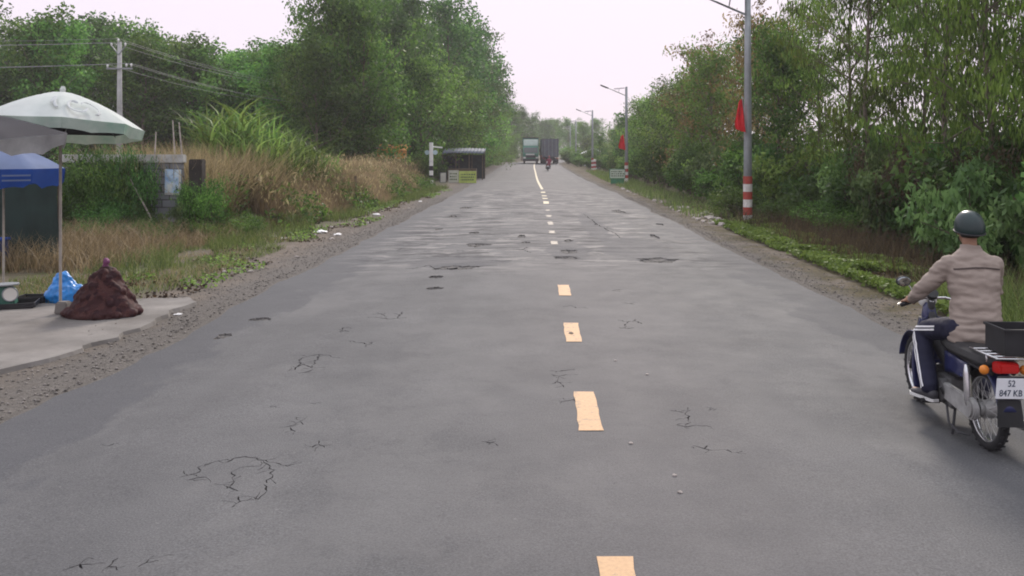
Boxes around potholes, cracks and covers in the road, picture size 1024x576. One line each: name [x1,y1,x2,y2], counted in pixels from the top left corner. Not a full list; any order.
crack [289,327,375,373]
crack [65,555,166,571]
crack [179,402,325,507]
crack [671,407,744,454]
